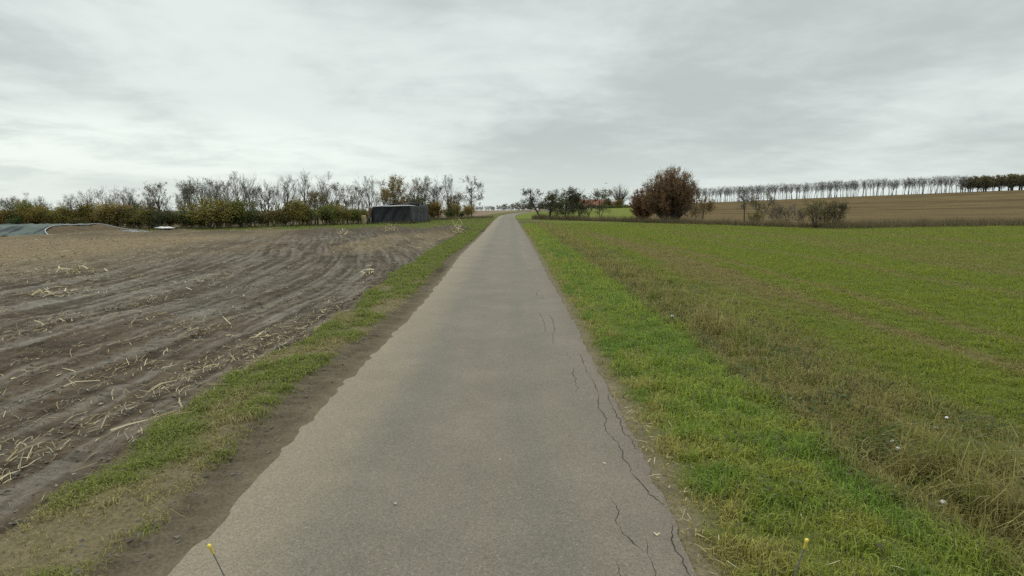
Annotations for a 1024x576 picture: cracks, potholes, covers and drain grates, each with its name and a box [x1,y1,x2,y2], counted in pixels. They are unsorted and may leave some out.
crack [541,316,690,576]
